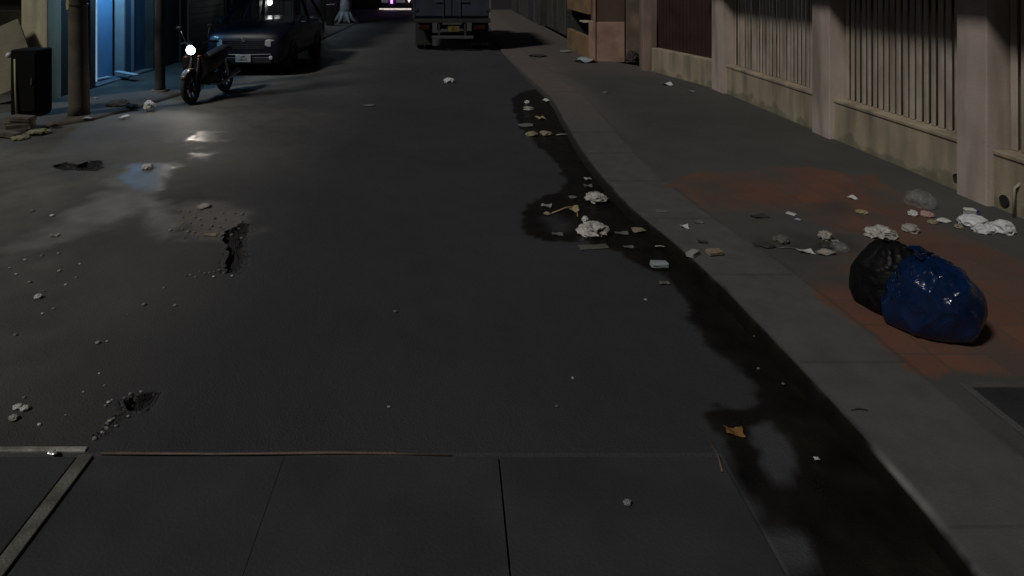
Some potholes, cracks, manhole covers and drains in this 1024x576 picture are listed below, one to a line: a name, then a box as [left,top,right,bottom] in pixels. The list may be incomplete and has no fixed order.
pothole [47,159,109,173]
pothole [218,221,256,276]
pothole [120,390,162,414]
